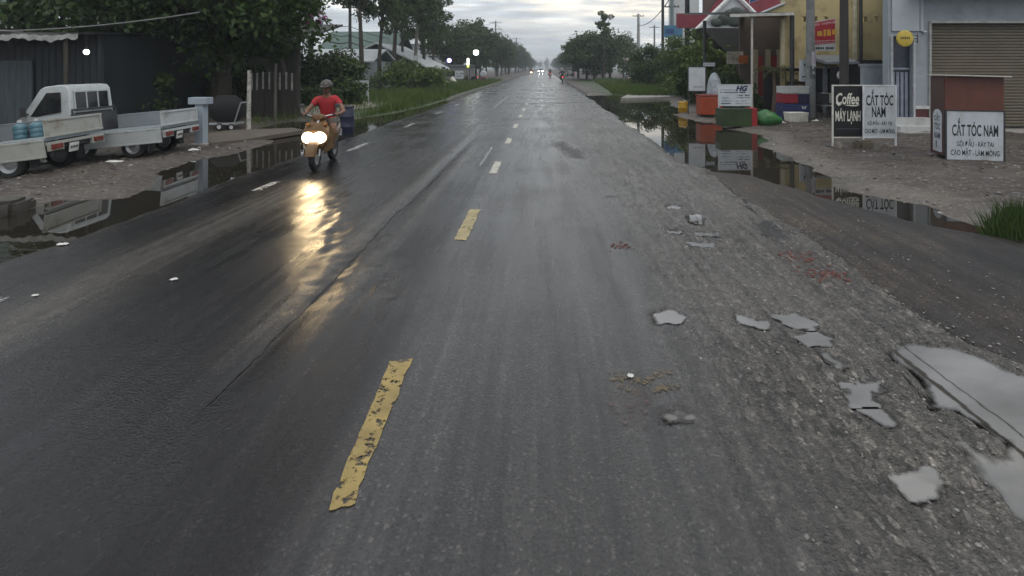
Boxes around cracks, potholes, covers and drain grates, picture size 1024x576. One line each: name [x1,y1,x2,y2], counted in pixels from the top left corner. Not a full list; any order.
pothole [650,309,686,325]
pothole [814,348,851,371]
pothole [662,412,696,424]
pothole [684,214,706,225]
pothole [856,409,902,429]
pothole [793,331,834,348]
pothole [889,344,1024,521]
pothole [771,314,819,332]
pothole [835,377,887,409]
pothole [734,315,770,331]
